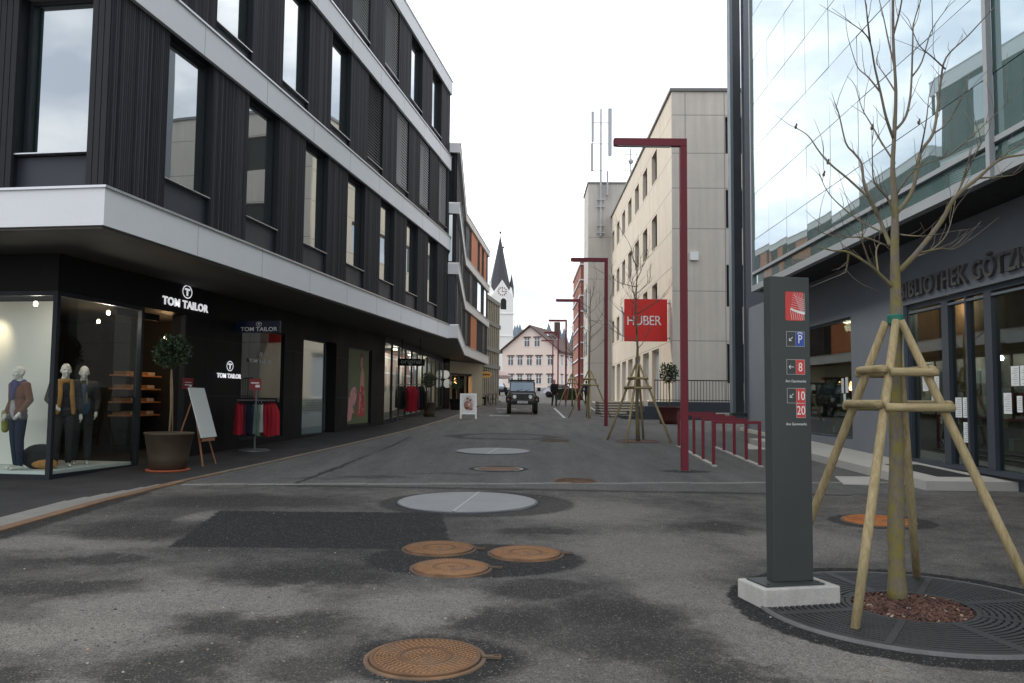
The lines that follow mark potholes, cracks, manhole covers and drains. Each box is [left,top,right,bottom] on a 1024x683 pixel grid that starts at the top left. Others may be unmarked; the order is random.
manhole cover [402,540,486,557]
manhole cover [487,545,573,562]
manhole cover [409,558,502,578]
manhole cover [840,514,918,527]
manhole cover [396,492,538,514]
manhole cover [363,638,501,681]
